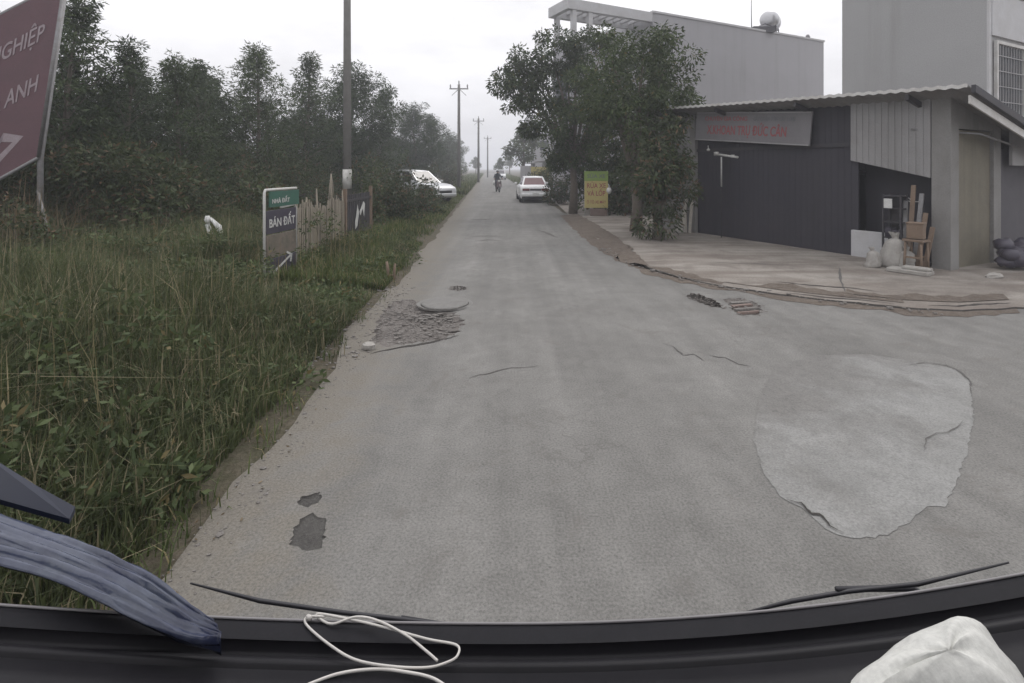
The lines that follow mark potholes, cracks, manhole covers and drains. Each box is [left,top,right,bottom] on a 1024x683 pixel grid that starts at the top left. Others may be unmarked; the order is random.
pothole [687,293,722,308]
manhole cover [416,296,473,312]
pothole [371,299,466,347]
crack [663,343,749,366]
